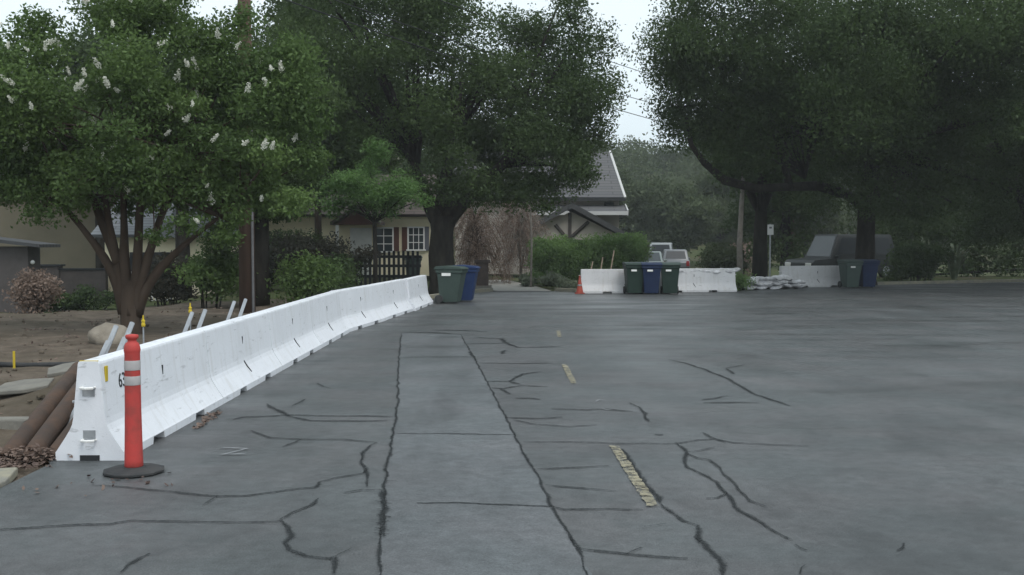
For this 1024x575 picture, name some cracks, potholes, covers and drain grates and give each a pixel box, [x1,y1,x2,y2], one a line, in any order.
crack [674,360,790,406]
crack [5,383,392,573]
crack [409,371,808,575]
